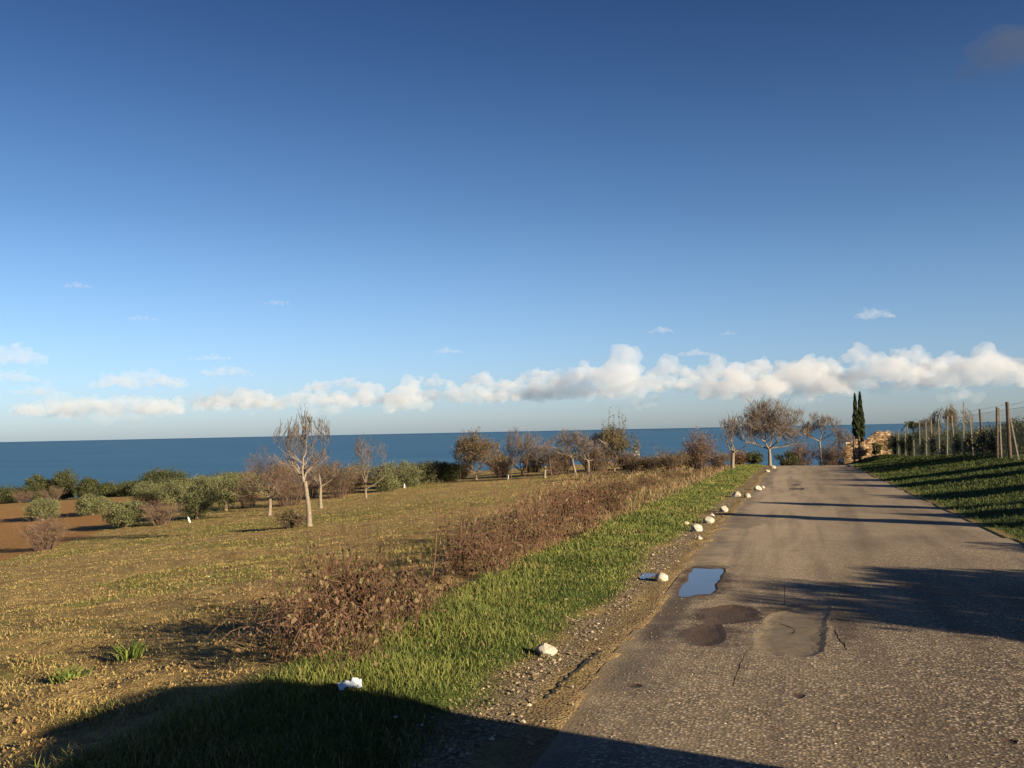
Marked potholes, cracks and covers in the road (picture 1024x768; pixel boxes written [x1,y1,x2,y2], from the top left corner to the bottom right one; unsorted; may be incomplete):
pothole [676,566,726,597]
